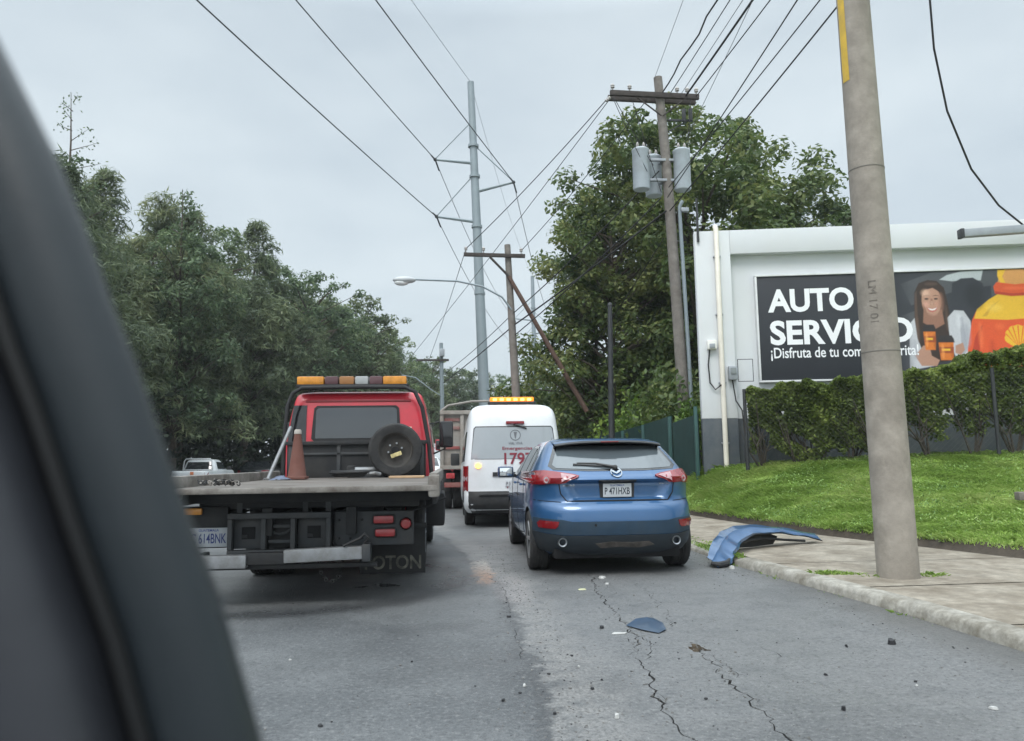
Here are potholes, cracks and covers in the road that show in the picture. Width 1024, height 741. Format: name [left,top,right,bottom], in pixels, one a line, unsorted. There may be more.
crack [589,573,697,741]
crack [693,649,812,741]
